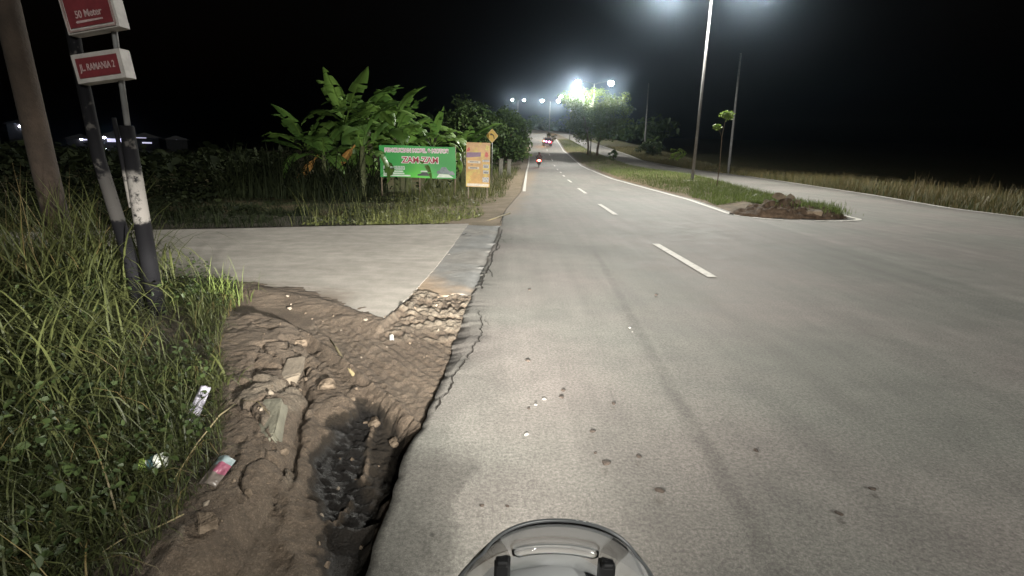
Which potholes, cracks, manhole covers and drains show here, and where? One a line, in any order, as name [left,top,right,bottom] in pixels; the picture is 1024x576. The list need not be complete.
crack [436,311,485,410]
